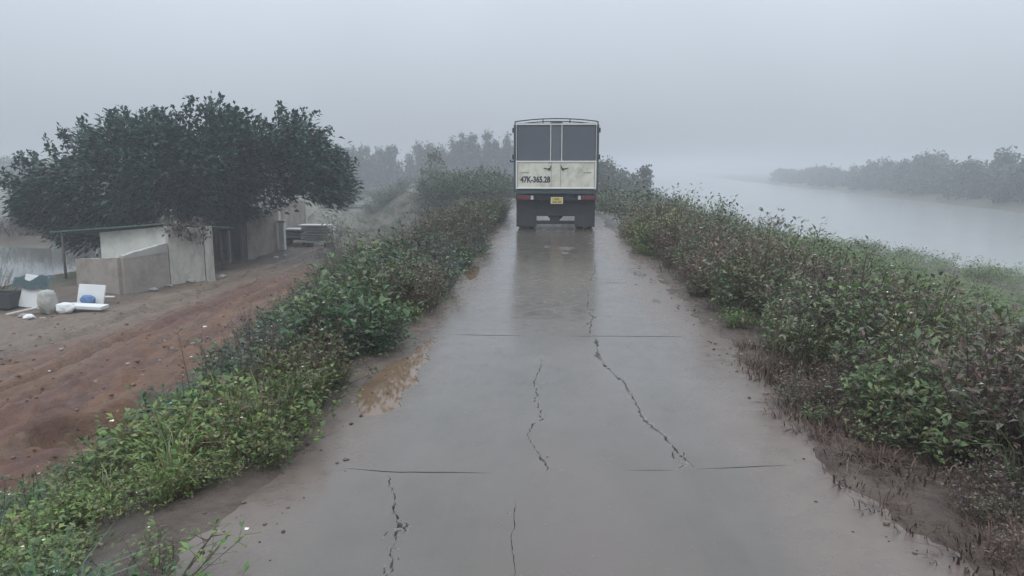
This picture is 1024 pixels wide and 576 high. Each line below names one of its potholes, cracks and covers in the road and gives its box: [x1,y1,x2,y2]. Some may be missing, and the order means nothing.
crack [527,359,564,472]
crack [506,505,522,576]
crack [583,262,696,470]
crack [383,475,410,576]
